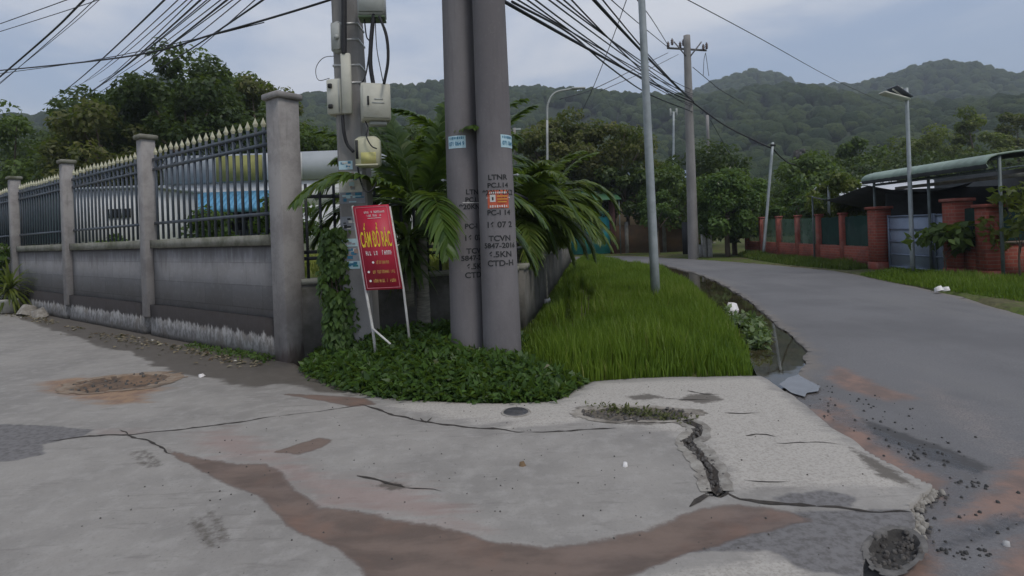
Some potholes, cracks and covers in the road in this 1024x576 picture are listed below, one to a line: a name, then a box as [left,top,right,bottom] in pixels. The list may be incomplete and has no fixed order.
pothole [55,371,188,394]
crack [119,429,170,454]
crack [667,391,911,512]
pothole [861,525,928,576]
manhole cover [501,407,531,418]
